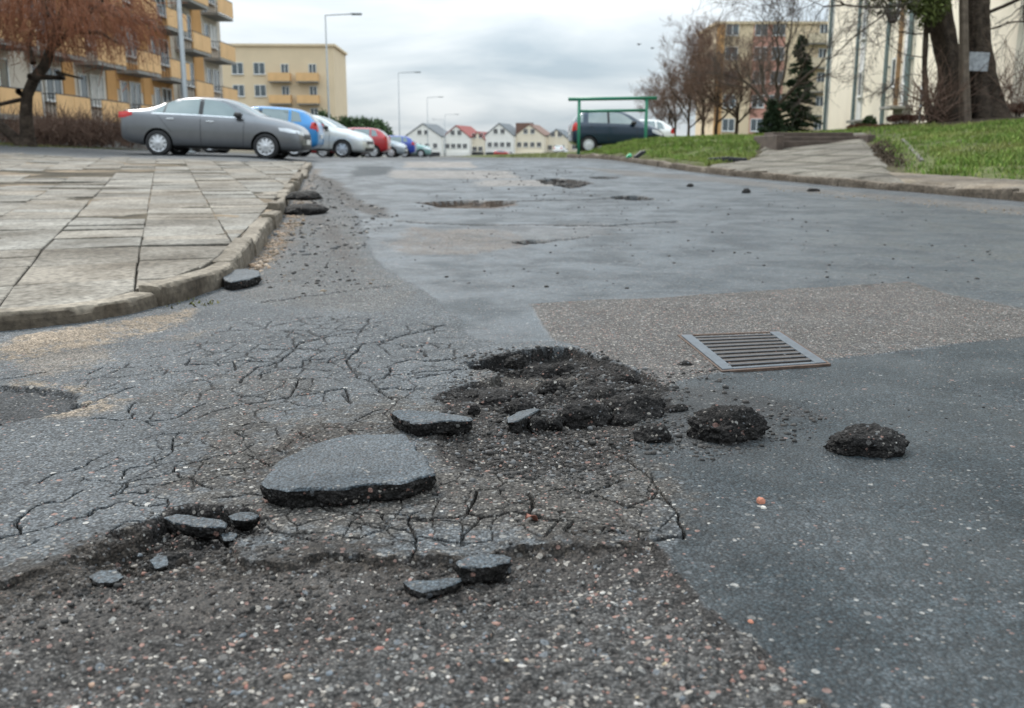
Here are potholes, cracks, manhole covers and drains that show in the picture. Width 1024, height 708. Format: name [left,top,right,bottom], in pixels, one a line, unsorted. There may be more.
pothole [0,386,86,425]
crack [242,469,676,559]
pothole [537,178,593,188]
drain grate [677,331,831,372]
crack [0,316,469,547]
pothole [430,347,671,476]
pothole [425,200,504,209]
